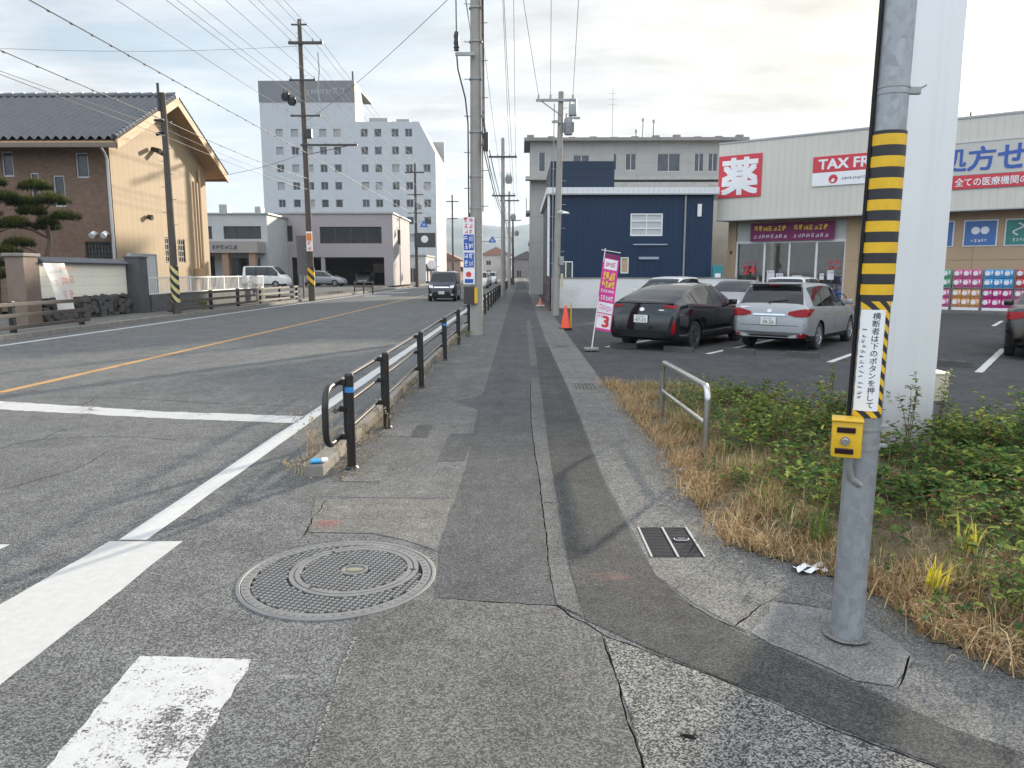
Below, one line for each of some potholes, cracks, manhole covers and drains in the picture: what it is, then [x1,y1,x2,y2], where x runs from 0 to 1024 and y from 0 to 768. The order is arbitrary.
crack [457,599,940,768]
manhole cover [235,541,436,622]
crack [303,496,425,536]
